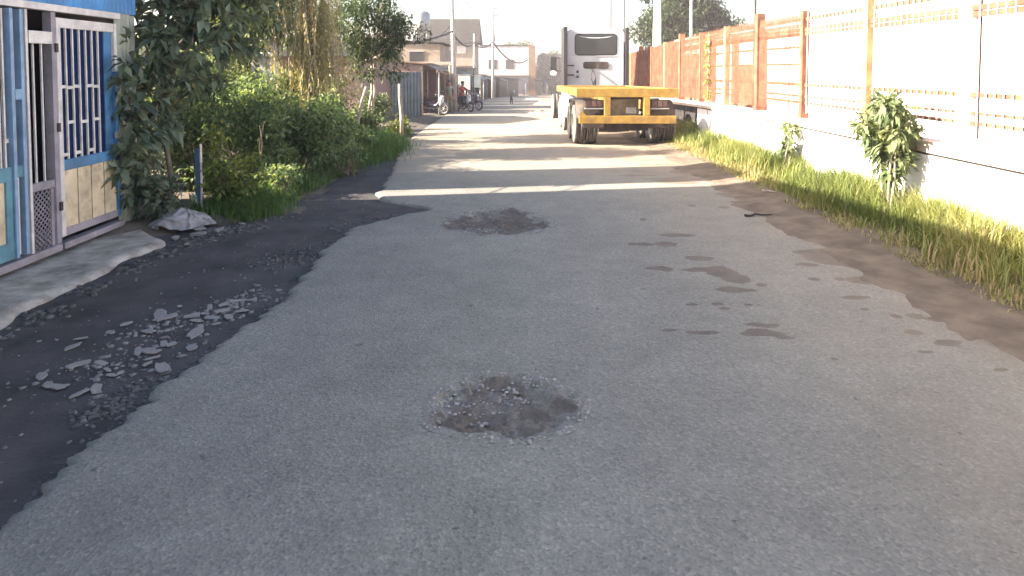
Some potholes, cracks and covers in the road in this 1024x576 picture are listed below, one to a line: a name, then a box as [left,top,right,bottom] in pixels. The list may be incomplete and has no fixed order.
pothole [421,370,592,445]
pothole [432,205,559,237]
